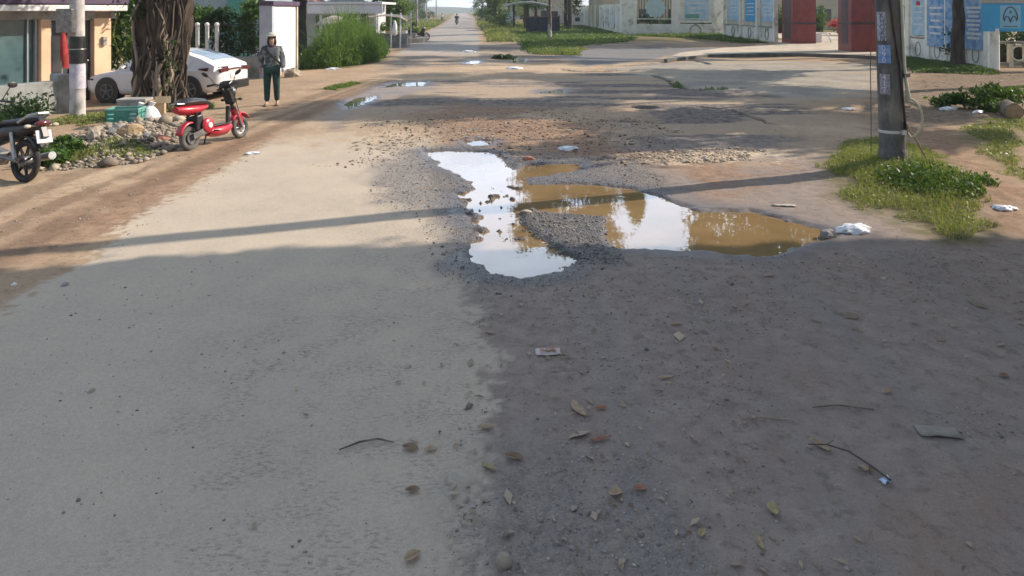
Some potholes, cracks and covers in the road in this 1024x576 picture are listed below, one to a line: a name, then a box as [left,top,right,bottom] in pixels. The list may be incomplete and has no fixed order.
pothole [373,80,430,88]
pothole [336,94,384,110]
pothole [414,147,856,282]
